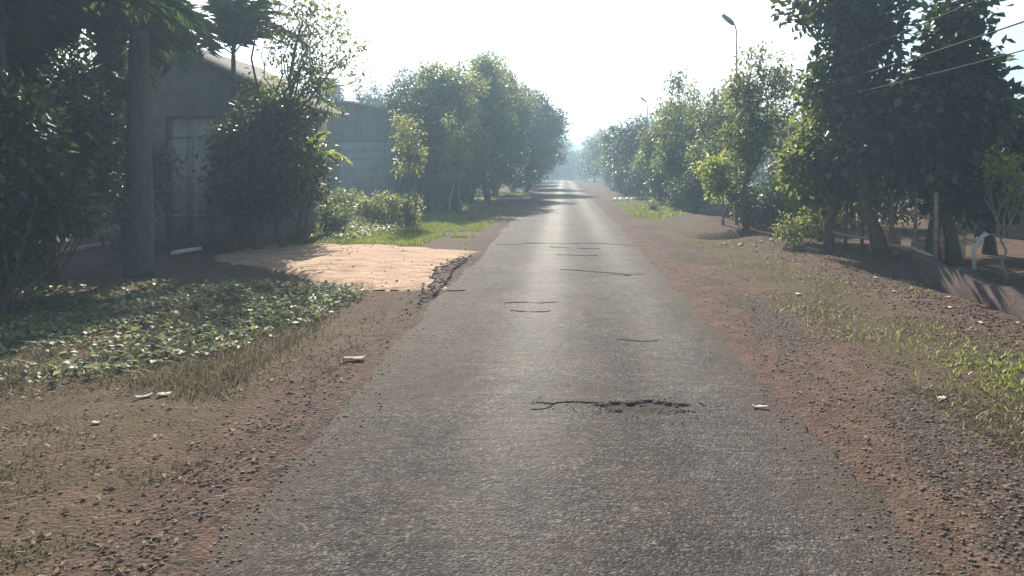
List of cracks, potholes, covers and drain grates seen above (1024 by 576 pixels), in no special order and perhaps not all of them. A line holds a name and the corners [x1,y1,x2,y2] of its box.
crack [496,243,644,276]
pothole [595,400,688,415]
crack [509,302,557,312]
